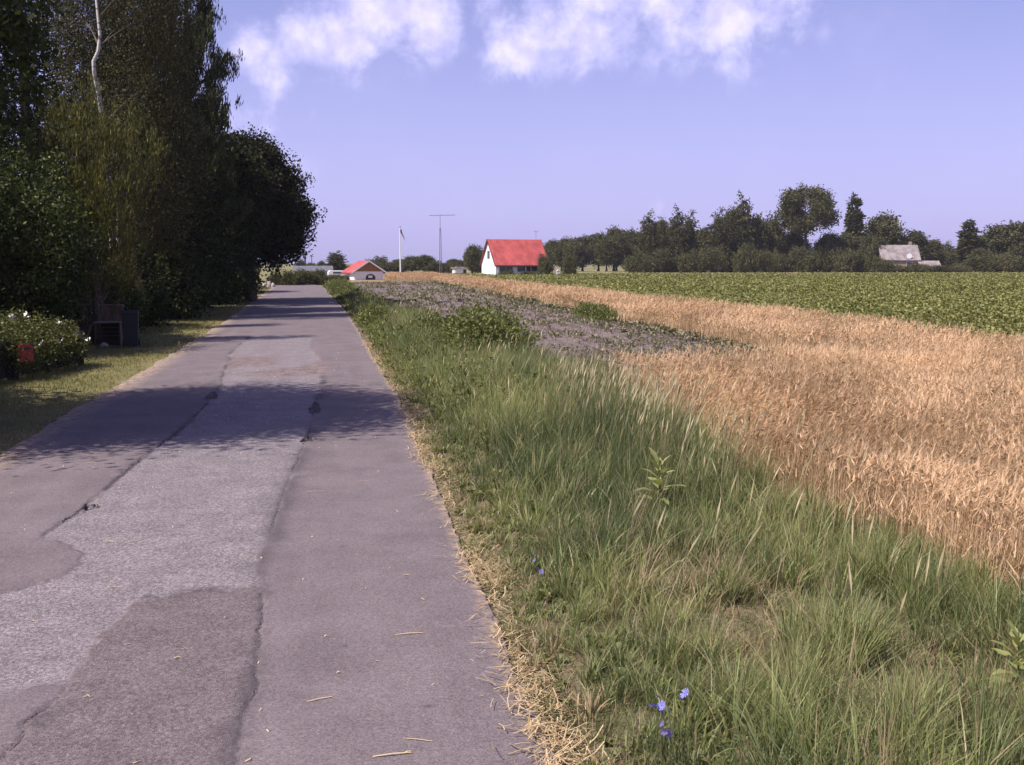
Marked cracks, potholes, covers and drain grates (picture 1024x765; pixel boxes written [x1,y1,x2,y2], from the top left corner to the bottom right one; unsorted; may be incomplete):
crack [10,703,53,751]
crack [250,605,264,700]
